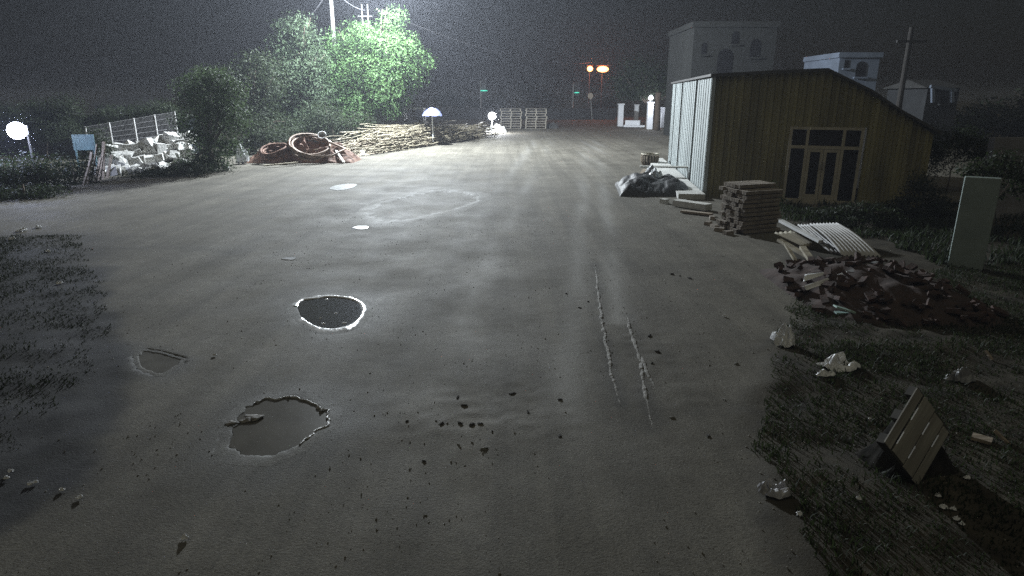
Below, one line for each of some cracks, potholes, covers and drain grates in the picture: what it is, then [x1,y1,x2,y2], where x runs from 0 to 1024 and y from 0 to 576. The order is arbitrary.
pothole [133,348,187,377]
pothole [213,390,344,467]
pothole [288,293,372,335]
